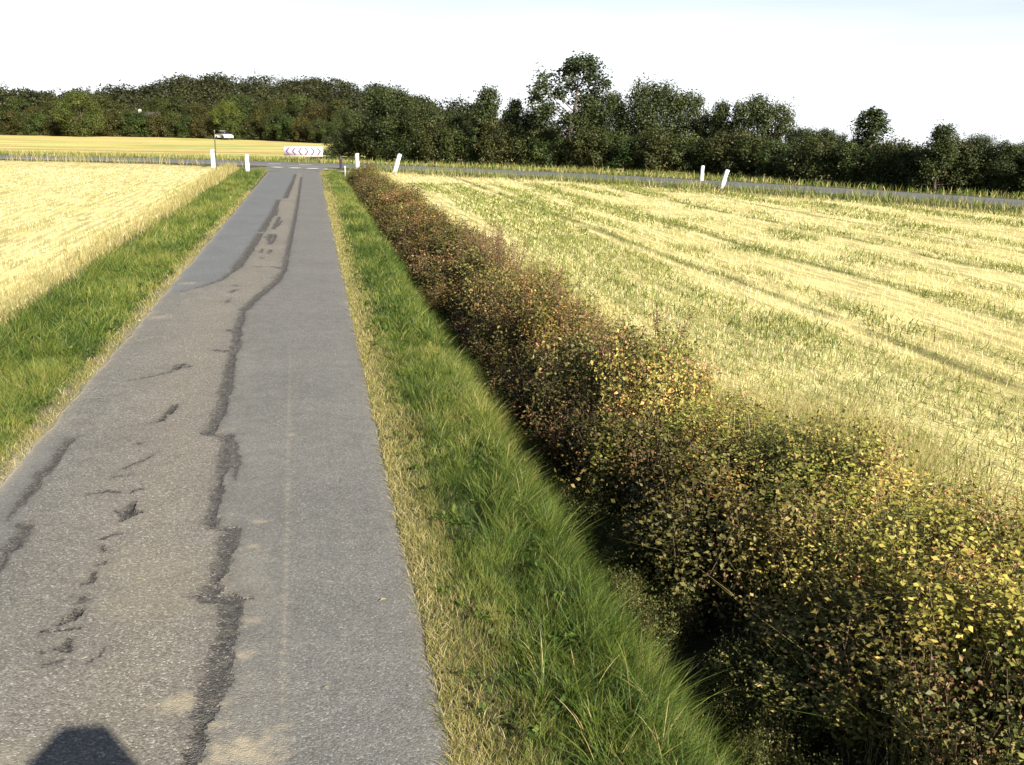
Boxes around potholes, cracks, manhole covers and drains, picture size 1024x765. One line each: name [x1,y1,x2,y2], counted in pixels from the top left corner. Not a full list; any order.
crack [37,421,157,668]
crack [0,437,77,574]
crack [128,174,302,765]
